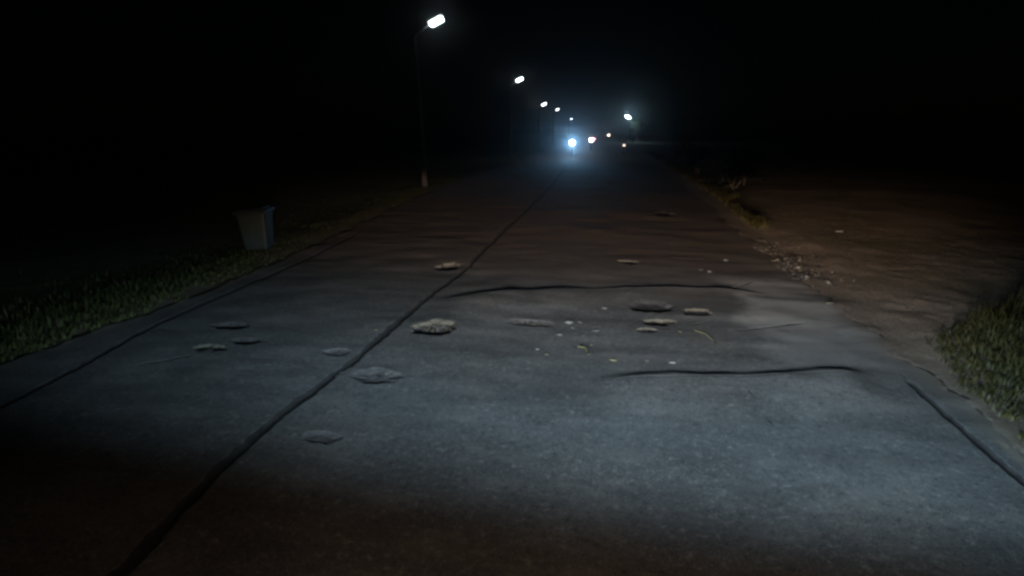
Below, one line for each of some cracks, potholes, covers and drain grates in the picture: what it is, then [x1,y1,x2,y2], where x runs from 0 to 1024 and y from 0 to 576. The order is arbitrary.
crack [436,278,822,333]
crack [600,369,869,435]
